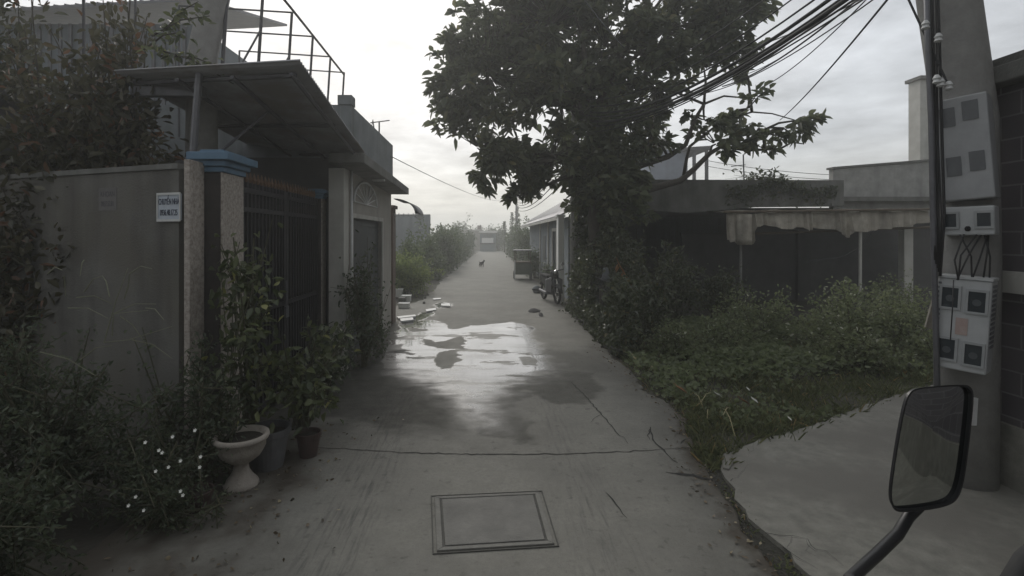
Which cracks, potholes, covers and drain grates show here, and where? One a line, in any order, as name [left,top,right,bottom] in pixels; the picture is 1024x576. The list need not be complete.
manhole cover [431,490,559,555]
